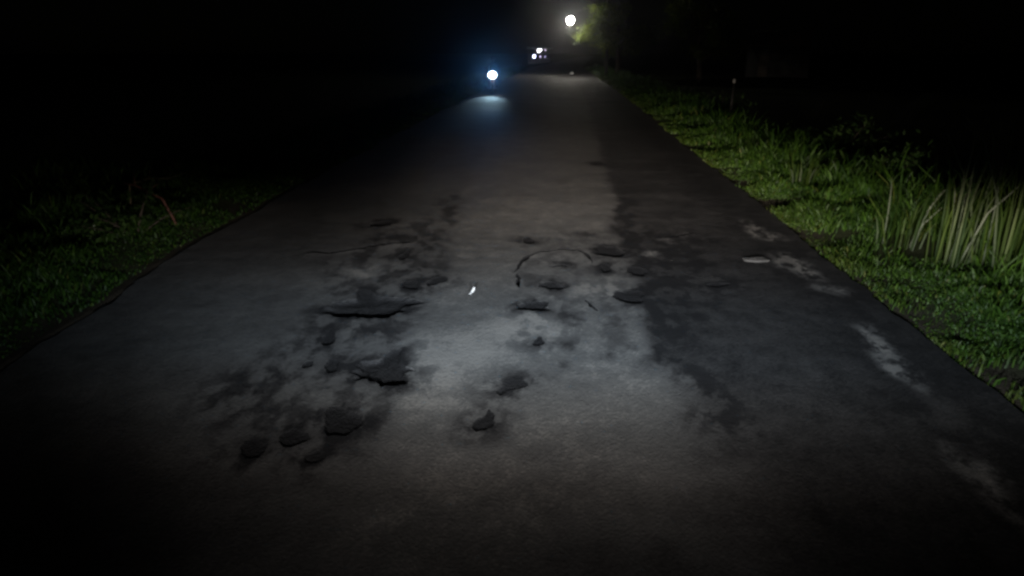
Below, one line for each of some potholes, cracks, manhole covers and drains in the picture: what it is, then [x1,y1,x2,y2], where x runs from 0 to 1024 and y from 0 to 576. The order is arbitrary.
crack [323,240,415,254]
pothole [304,450,326,463]
pothole [496,380,529,396]
crack [513,249,593,288]
pothole [323,405,365,436]
pothole [538,281,567,290]
